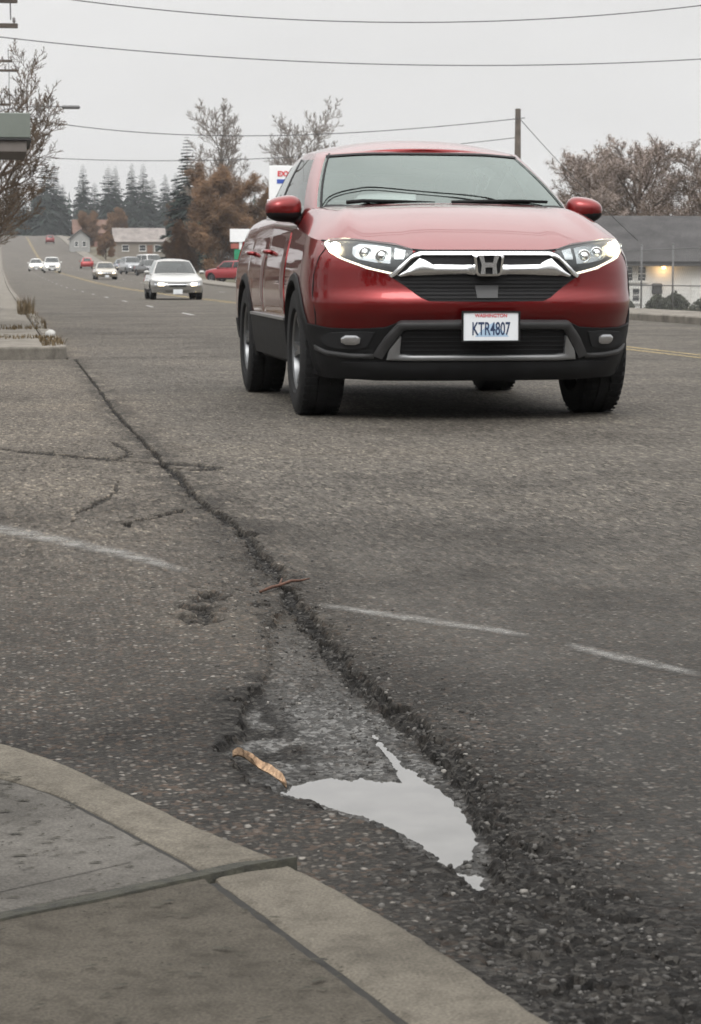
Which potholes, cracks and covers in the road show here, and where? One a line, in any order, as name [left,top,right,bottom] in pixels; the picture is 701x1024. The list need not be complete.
pothole [164,582,246,630]
pothole [210,603,515,895]
crack [0,359,701,1024]
